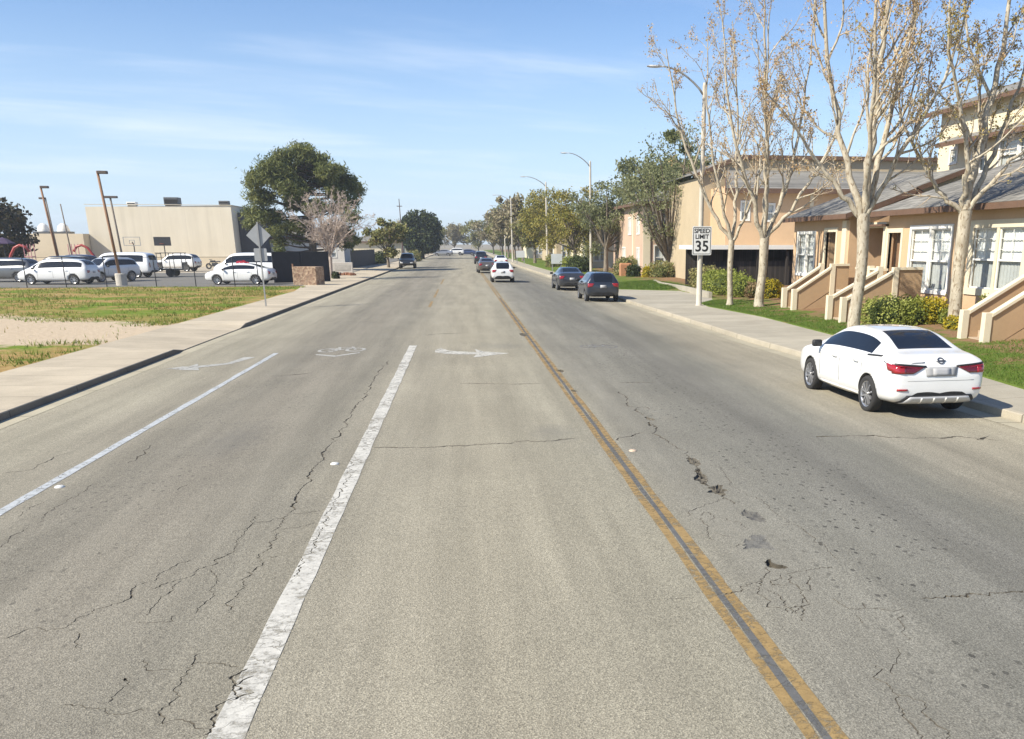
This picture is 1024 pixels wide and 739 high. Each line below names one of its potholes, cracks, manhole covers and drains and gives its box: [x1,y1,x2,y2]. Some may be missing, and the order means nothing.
crack [374,438,575,448]
crack [65,653,254,736]
crack [923,591,1024,599]
pothole [707,485,728,496]
pothole [693,468,708,485]
crack [616,382,746,546]
crack [714,566,832,622]
pothole [764,559,788,569]
crack [8,361,388,650]
crack [834,599,951,739]
